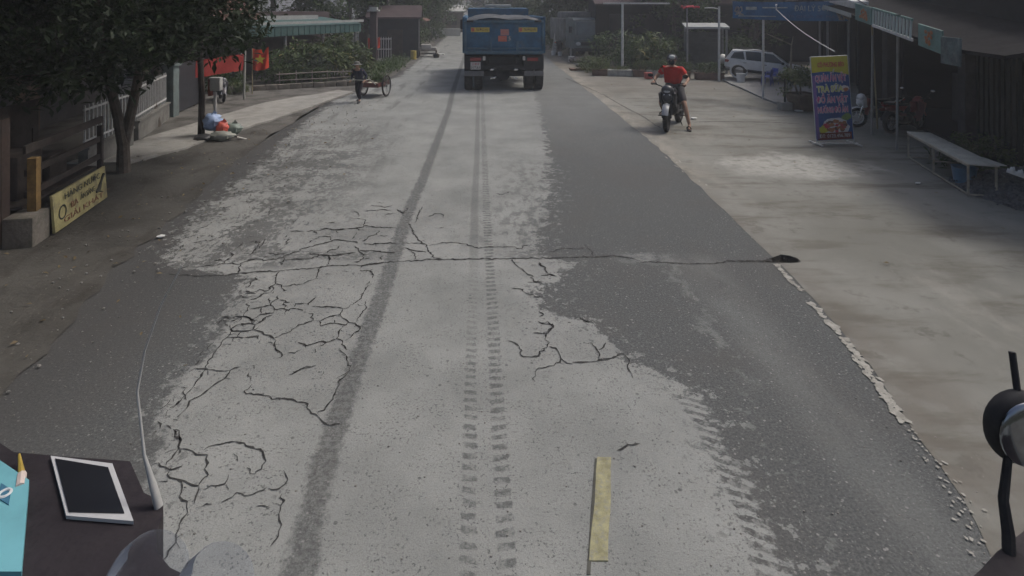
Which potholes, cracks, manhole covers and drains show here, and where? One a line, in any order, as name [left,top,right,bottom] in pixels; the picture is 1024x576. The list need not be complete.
pothole [763,254,801,263]
crack [152,192,772,560]
